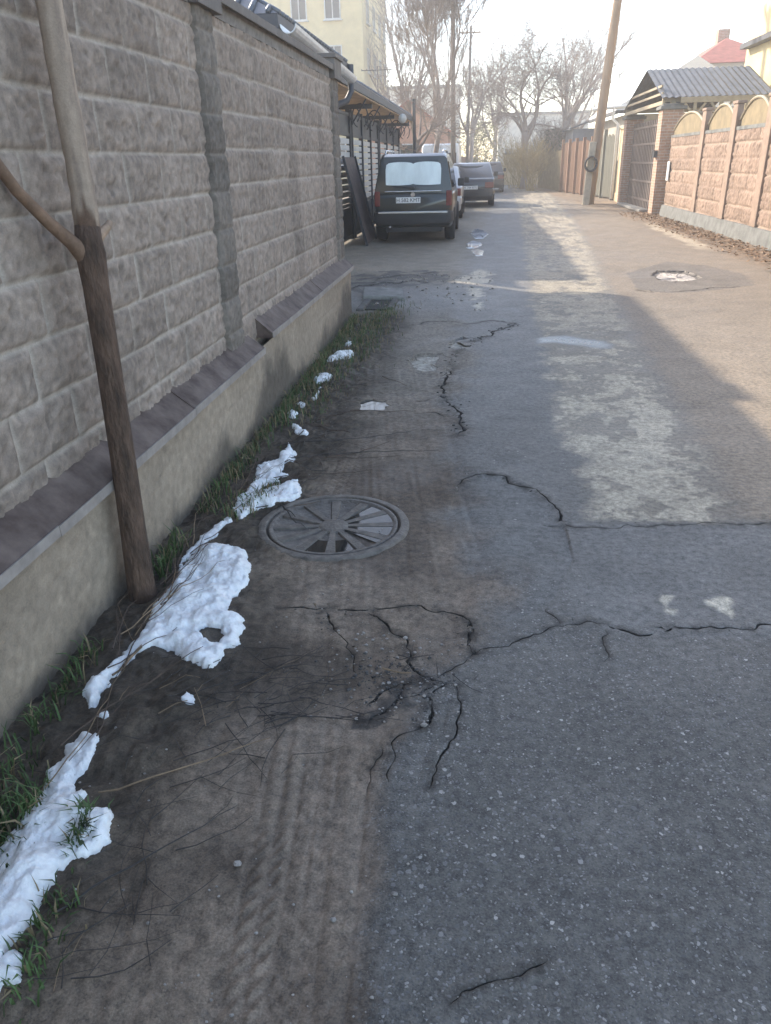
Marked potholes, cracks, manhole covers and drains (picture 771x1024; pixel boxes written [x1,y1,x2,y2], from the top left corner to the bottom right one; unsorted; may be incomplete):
manhole cover [258,495,409,562]
crack [274,599,771,798]
crack [442,951,556,1014]
crack [449,469,771,534]
pothole [642,269,711,283]
crack [400,319,527,438]
